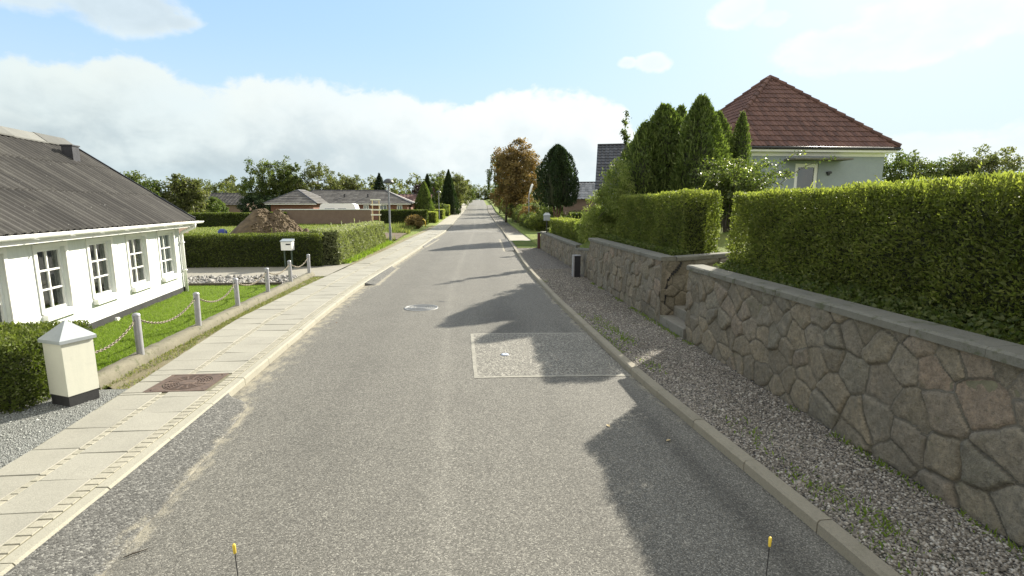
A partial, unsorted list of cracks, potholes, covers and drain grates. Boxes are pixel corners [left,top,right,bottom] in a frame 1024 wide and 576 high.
manhole cover [143,373,229,393]
